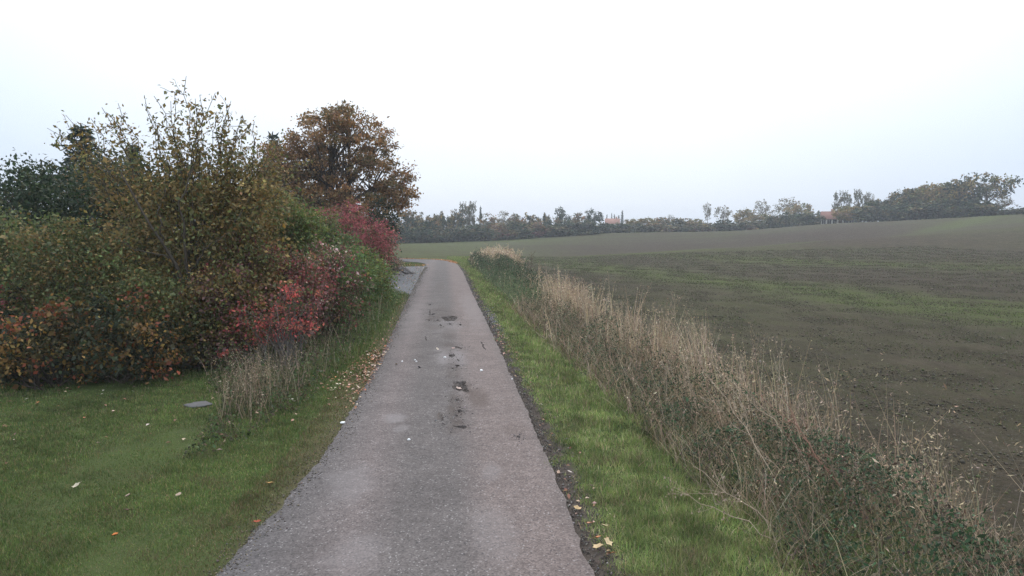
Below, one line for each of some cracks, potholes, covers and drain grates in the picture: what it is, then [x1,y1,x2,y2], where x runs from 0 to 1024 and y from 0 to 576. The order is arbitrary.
pothole [452,381,469,392]
